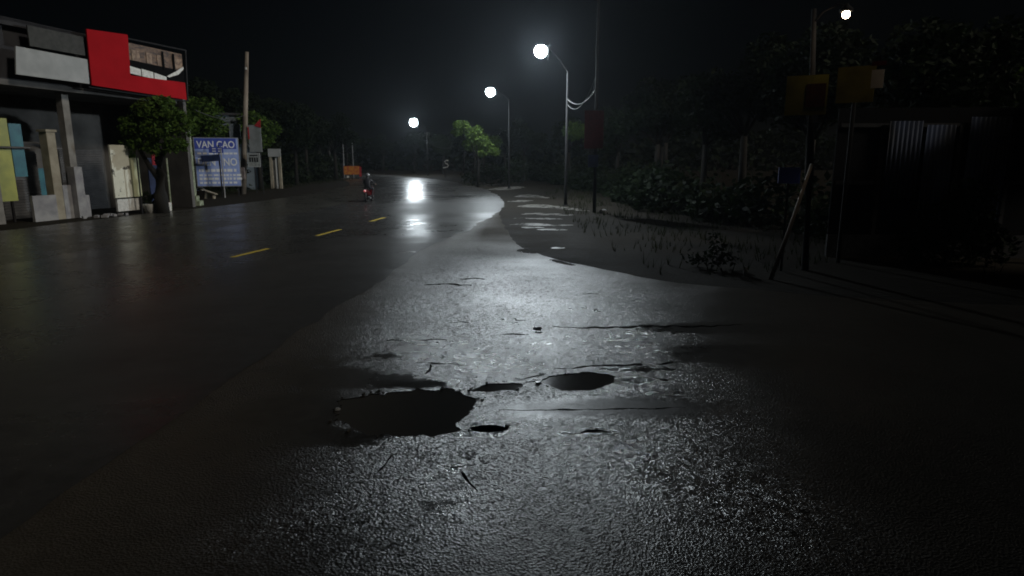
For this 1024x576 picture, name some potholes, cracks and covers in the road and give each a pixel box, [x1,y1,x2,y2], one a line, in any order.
pothole [329,387,484,438]
pothole [535,372,616,391]
pothole [467,382,523,392]
crack [418,362,469,374]
pothole [468,424,509,432]
crack [441,465,478,491]
